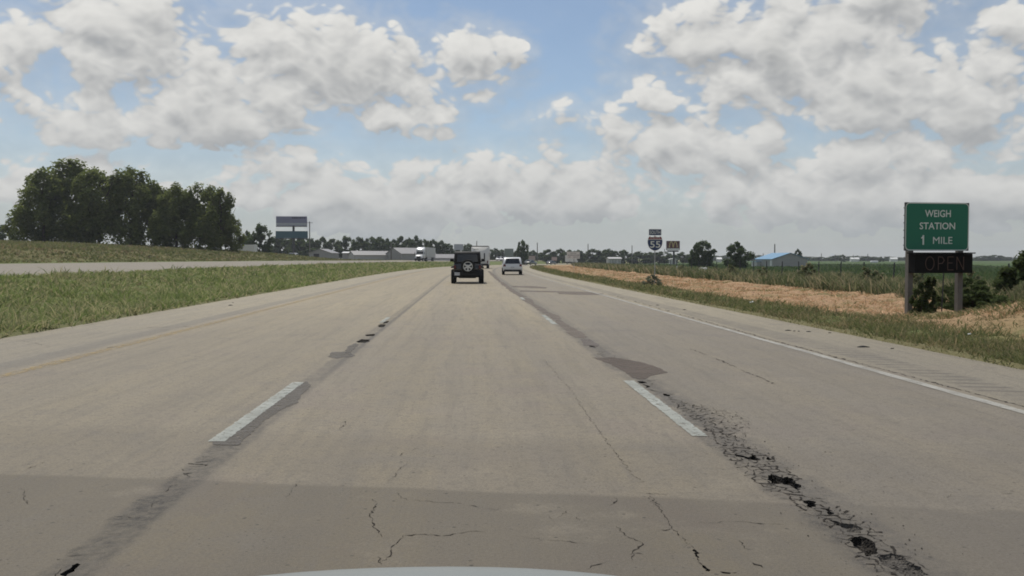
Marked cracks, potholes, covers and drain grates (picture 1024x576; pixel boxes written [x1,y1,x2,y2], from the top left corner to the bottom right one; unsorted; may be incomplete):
pothole [850,536,878,556]
pothole [767,474,801,490]
crack [668,397,927,576]
crack [55,364,701,576]
